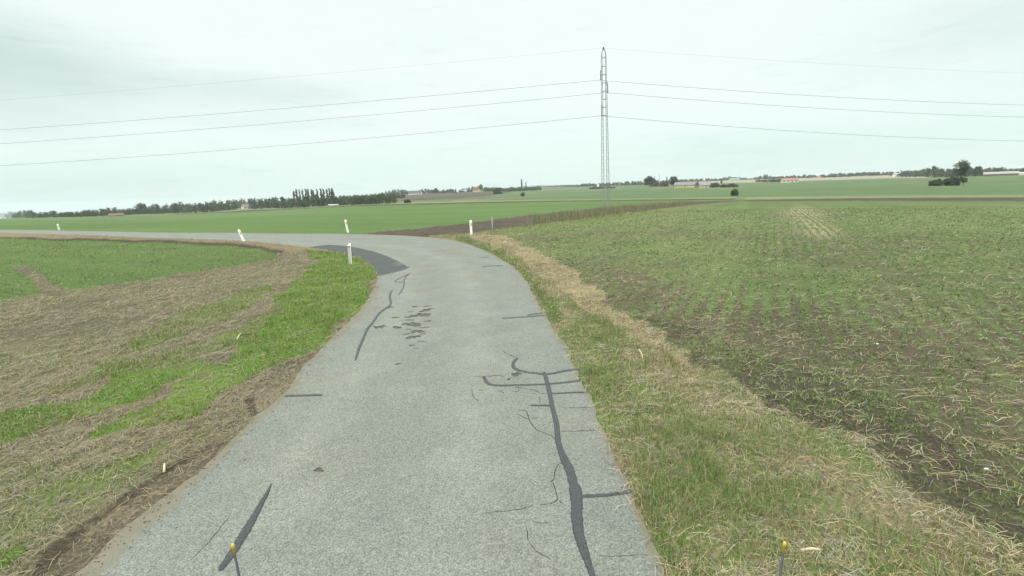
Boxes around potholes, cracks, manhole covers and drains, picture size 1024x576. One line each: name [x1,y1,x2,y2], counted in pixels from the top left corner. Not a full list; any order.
crack [486,463,564,560]
crack [471,375,599,439]
